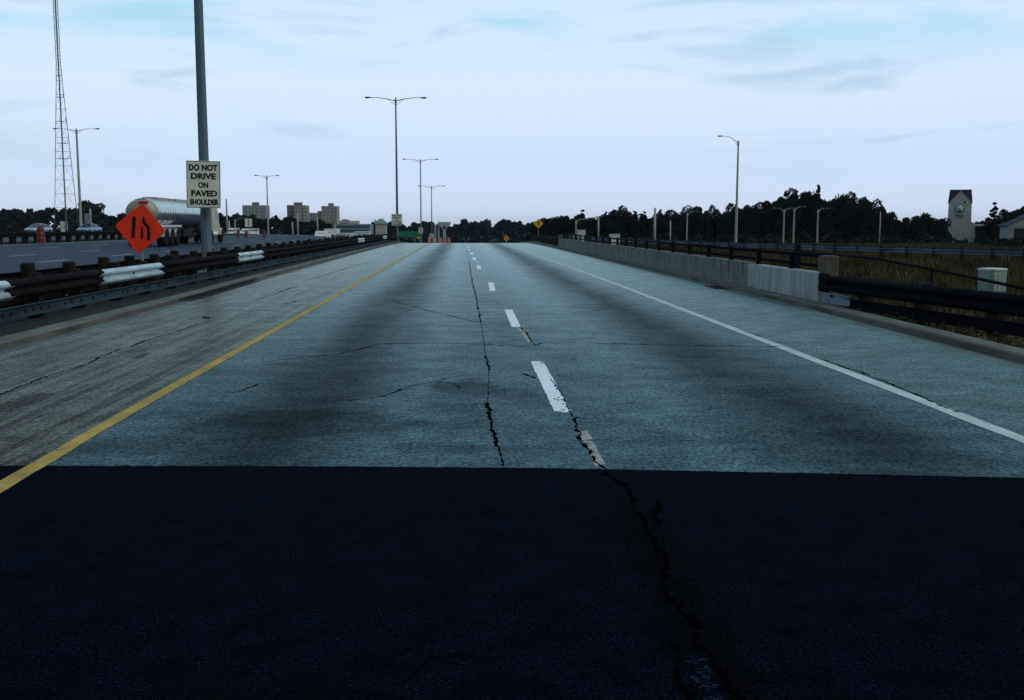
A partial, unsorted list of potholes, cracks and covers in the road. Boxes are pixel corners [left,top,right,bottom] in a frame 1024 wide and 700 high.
crack [523,373,744,700]
crack [821,359,957,412]
crack [267,250,777,467]
crack [0,324,198,395]
